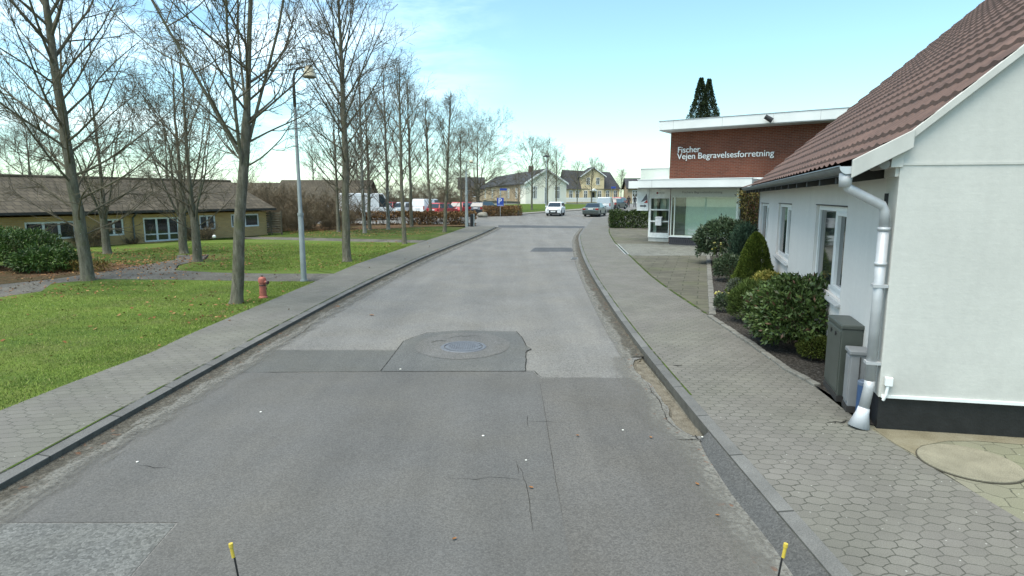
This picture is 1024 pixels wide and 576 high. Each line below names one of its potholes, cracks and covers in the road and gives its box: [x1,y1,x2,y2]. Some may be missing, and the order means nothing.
manhole cover [441,341,486,353]
manhole cover [915,444,1024,485]
